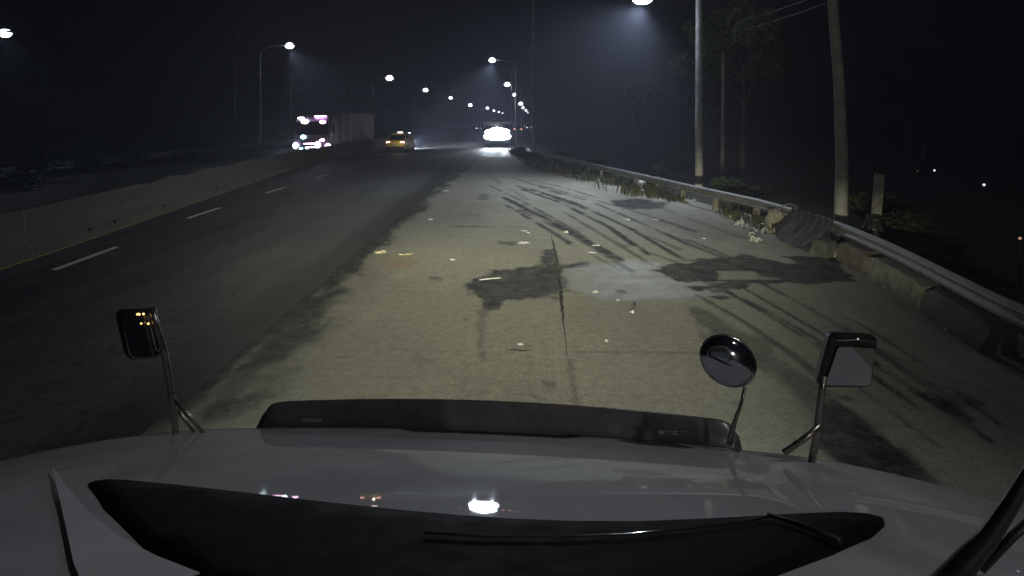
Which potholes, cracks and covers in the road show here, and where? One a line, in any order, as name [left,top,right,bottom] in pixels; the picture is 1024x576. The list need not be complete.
crack [509,234,585,357]
